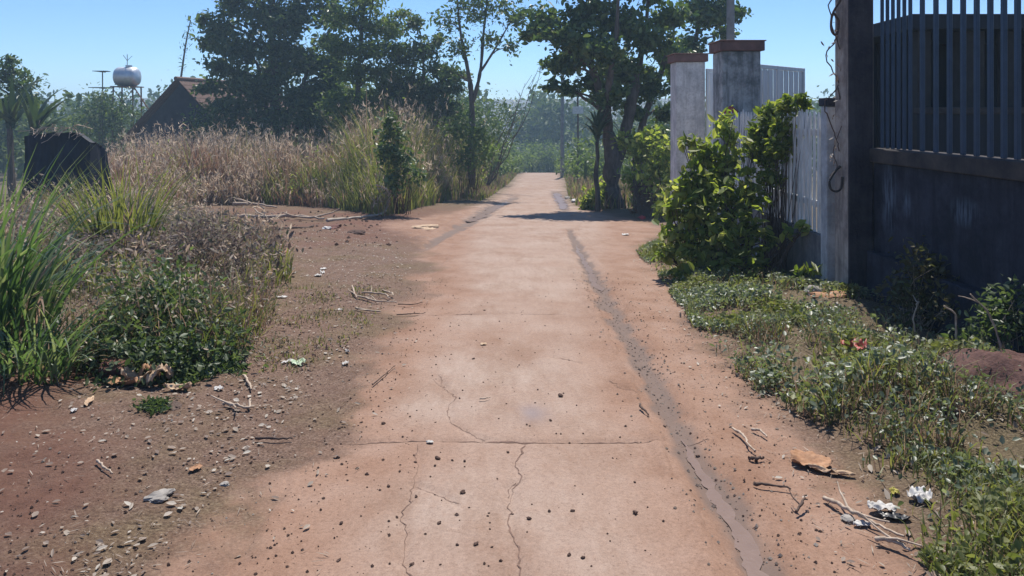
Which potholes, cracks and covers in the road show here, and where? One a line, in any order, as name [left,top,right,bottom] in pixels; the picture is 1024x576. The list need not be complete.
crack [344,377,708,576]
